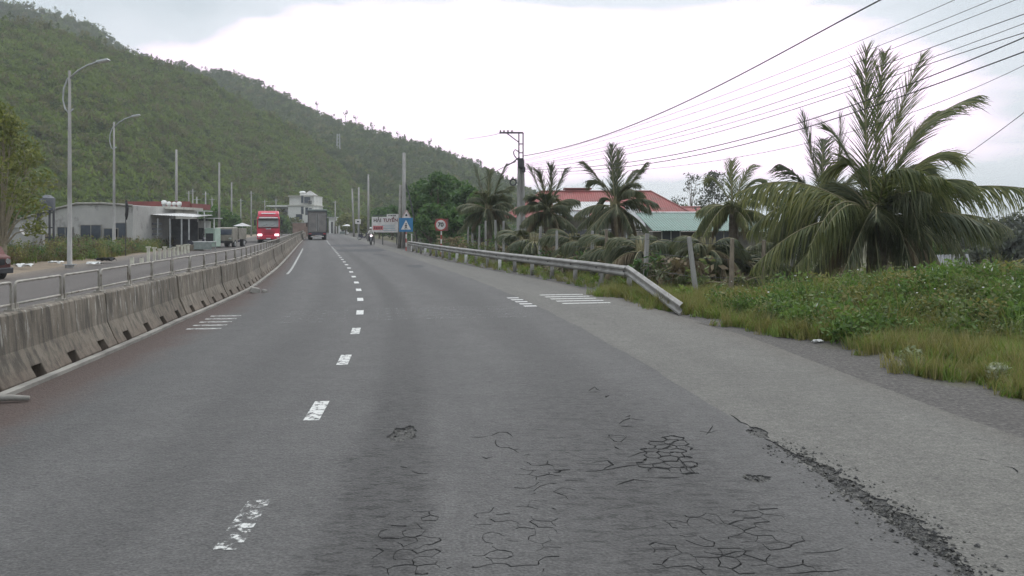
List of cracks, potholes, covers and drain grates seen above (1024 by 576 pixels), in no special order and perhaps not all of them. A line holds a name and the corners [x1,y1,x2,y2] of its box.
crack [649,502,845,575]
pothole [387,425,417,443]
pothole [743,474,771,483]
crack [471,415,772,572]
